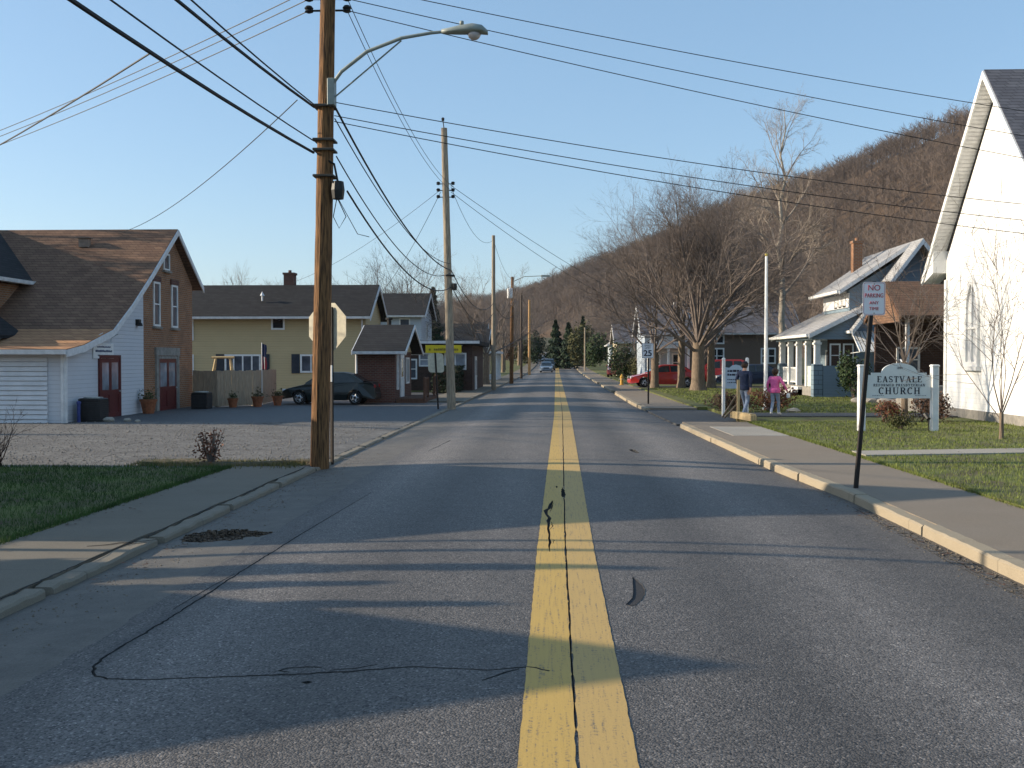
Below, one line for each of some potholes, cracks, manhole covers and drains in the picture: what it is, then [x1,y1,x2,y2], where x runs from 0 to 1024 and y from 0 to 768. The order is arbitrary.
crack [0,468,303,599]
pothole [627,577,645,606]
crack [543,501,554,552]
pothole [180,529,273,543]
crack [91,493,549,681]
